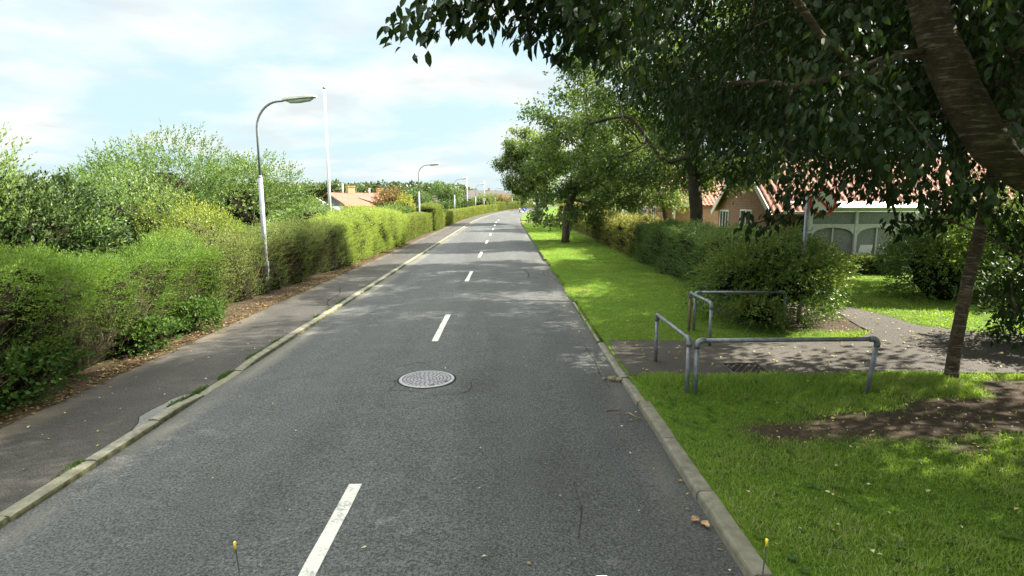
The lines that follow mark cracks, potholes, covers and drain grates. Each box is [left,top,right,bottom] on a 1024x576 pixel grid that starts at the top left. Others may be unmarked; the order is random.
drain grate [719,363,771,374]
manhole cover [397,370,456,388]
crack [574,480,583,540]
crack [388,362,475,395]
